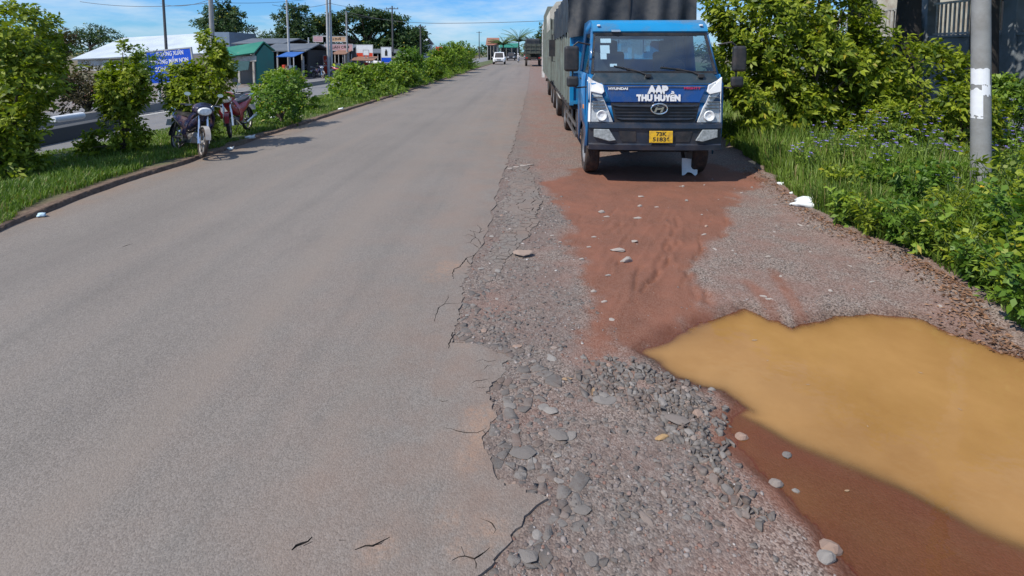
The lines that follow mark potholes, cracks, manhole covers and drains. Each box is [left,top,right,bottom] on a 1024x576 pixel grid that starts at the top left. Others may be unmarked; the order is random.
crack [292,537,313,550]
pothole [630,301,1024,576]
crack [452,519,496,566]
crack [345,537,390,550]
crack [452,164,539,279]
